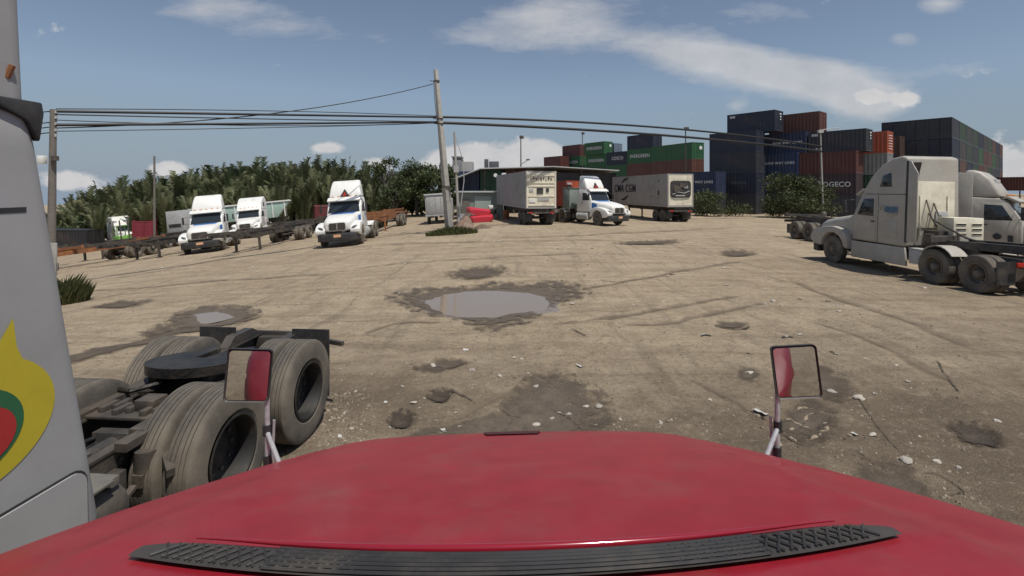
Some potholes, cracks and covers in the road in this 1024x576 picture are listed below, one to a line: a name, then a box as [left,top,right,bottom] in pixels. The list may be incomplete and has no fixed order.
pothole [163,304,263,330]
pothole [449,265,507,279]
pothole [386,408,416,428]
pothole [91,299,148,308]
pothole [413,373,614,436]
pothole [414,359,468,372]
pothole [948,420,1003,447]
pothole [740,368,758,380]
pothole [385,280,593,330]
